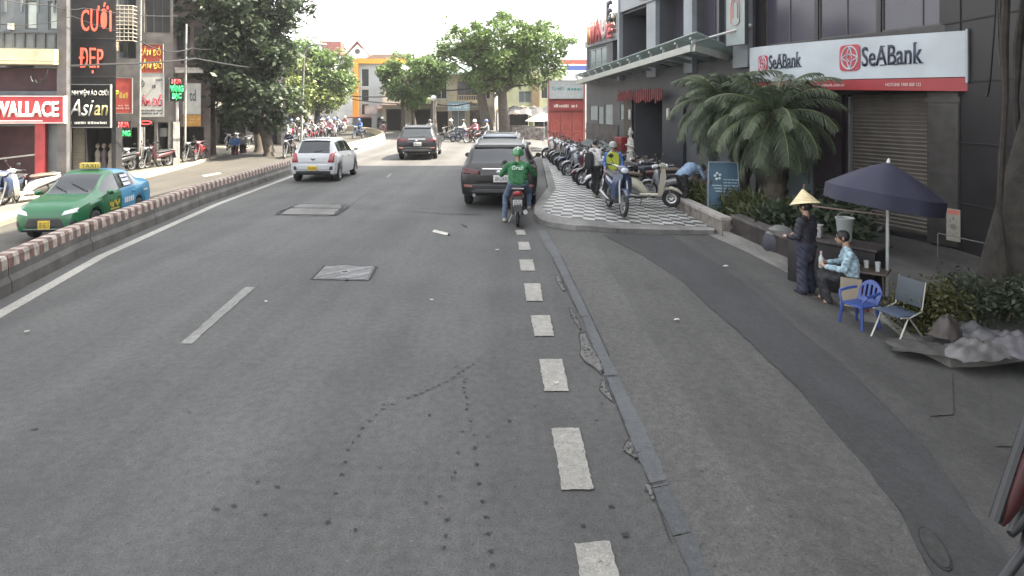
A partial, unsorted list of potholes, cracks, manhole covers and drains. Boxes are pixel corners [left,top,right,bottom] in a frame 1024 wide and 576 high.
manhole cover [276,203,350,217]
pothole [578,331,604,376]
manhole cover [918,526,952,572]
pothole [599,379,614,403]
manhole cover [310,265,378,281]
pothole [623,439,639,462]
